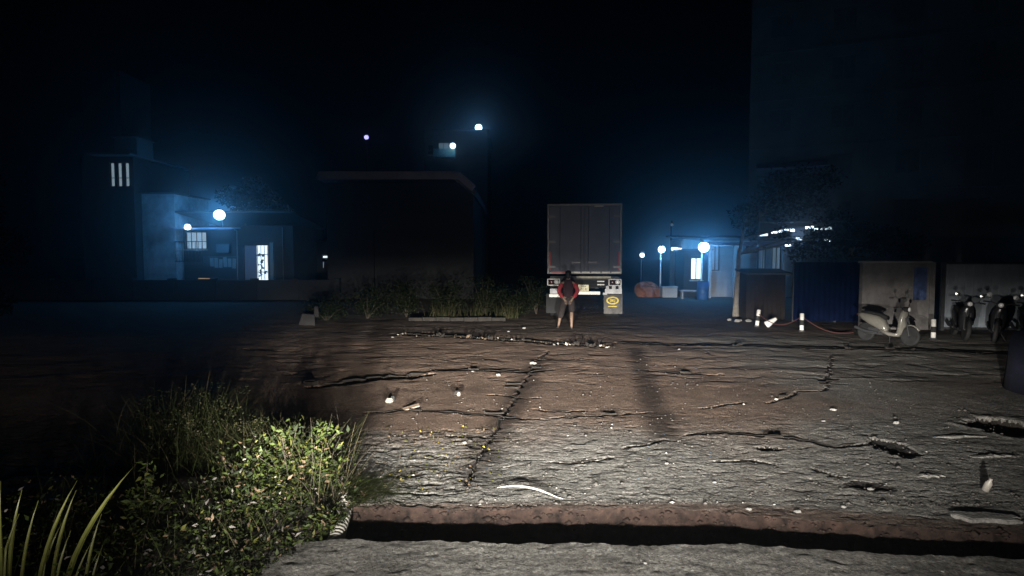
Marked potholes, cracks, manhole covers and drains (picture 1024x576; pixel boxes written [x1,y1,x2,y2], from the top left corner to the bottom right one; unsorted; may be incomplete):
crack [686,431,870,464]
pothole [843,481,897,493]
pothole [955,416,1024,437]
crack [303,351,652,486]
crack [767,355,839,404]
pothole [865,439,923,459]
